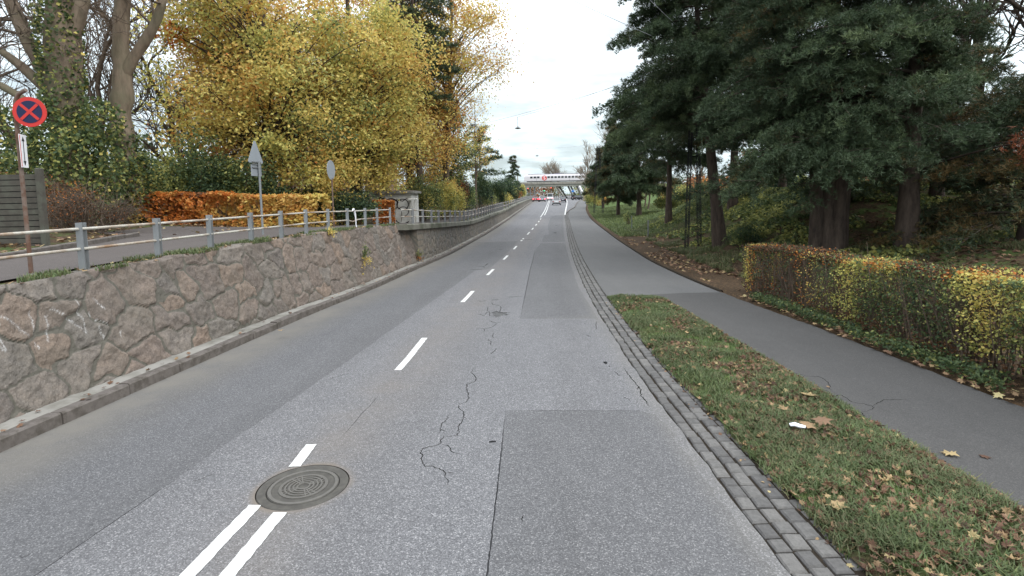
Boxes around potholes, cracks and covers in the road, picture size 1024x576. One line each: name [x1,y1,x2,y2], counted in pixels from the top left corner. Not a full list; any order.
crack [795,373,898,415]
crack [420,373,477,482]
manhole cover [256,465,349,511]
